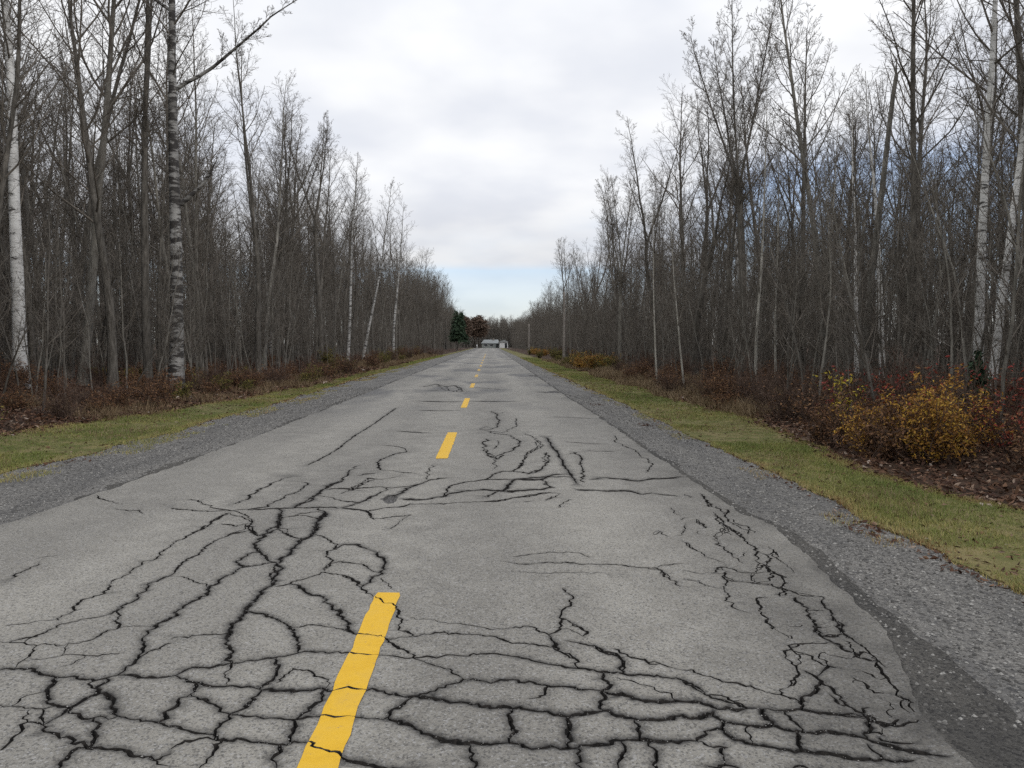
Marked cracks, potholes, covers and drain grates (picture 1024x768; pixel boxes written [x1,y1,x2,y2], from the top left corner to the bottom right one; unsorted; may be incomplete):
crack [0,384,947,768]
